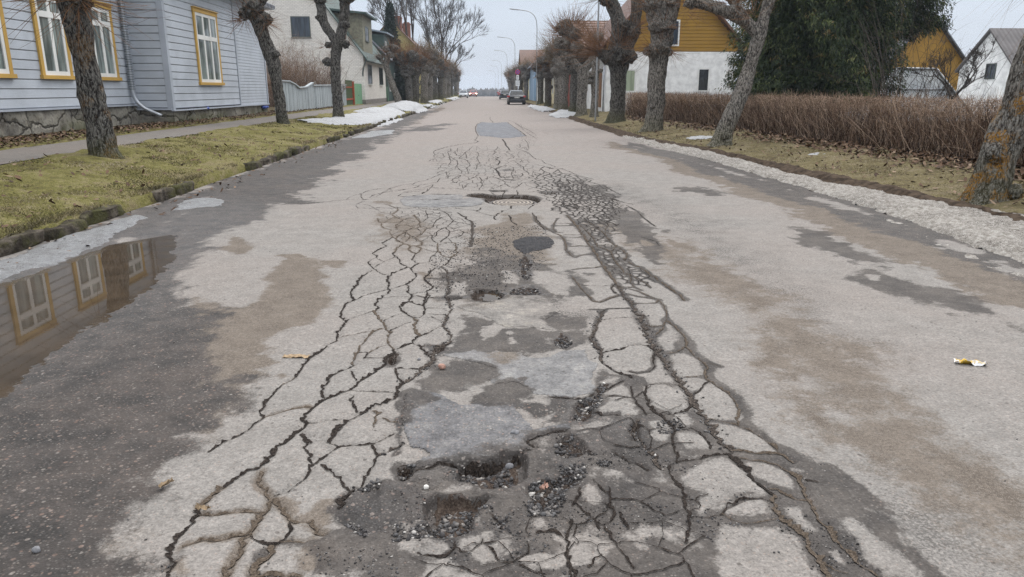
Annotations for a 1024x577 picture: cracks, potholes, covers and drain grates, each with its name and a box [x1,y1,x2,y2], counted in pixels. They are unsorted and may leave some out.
pothole [433,493,486,538]
pothole [465,462,522,489]
pothole [471,289,502,302]
crack [165,119,879,577]
pothole [532,473,578,509]
